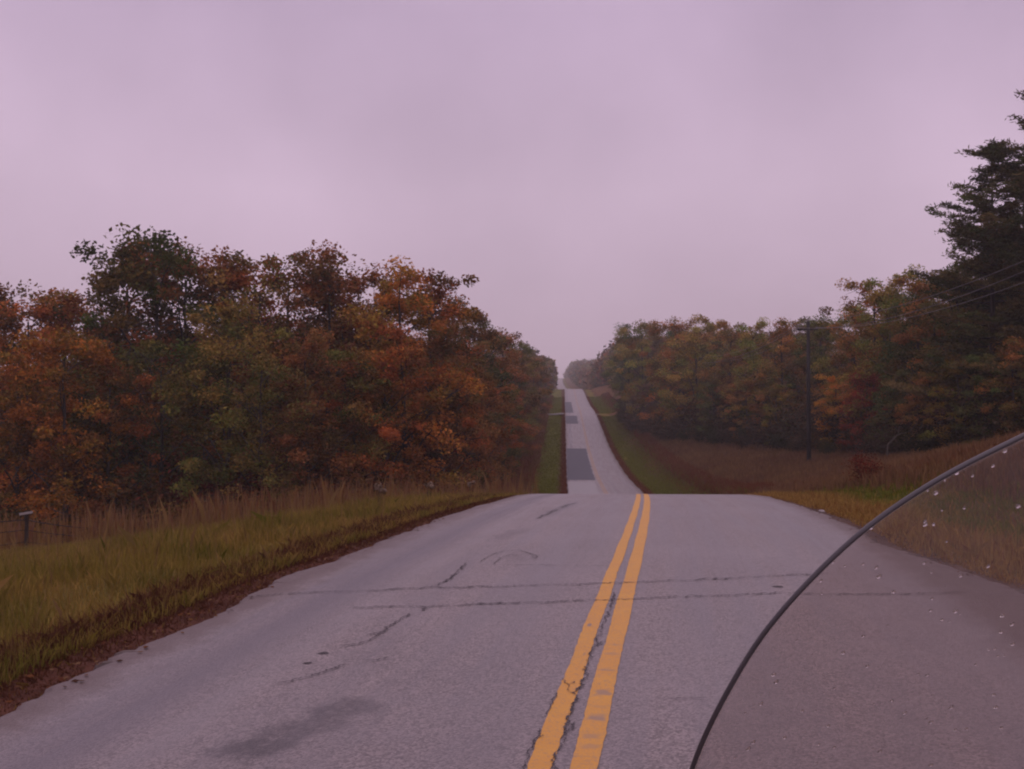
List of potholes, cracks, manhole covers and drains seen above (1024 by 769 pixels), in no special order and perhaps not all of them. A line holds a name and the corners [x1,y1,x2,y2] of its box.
crack [247,550,956,769]
